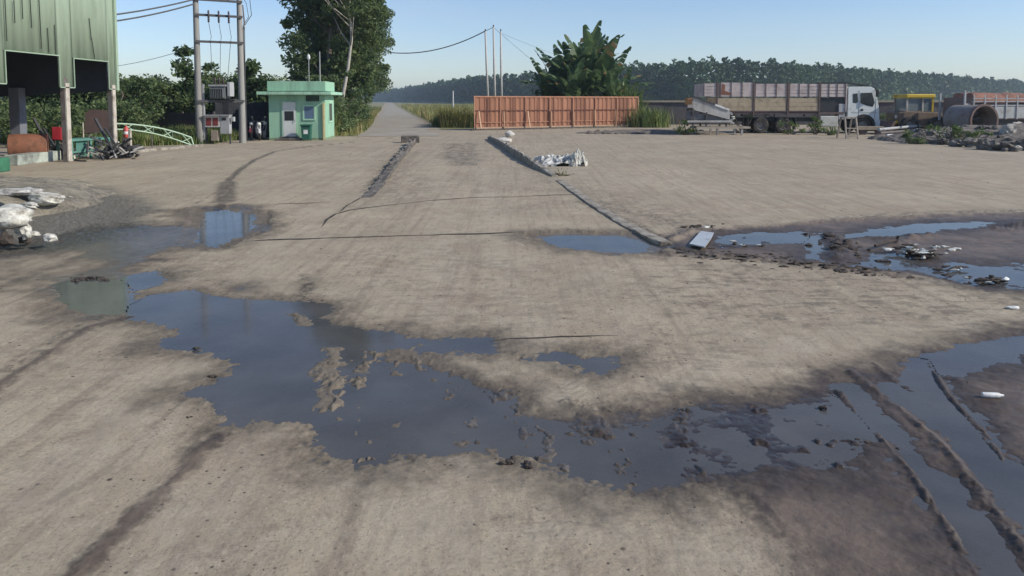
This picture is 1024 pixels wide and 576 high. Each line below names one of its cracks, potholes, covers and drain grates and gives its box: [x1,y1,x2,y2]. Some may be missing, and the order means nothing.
pothole [516,229,667,257]
pothole [176,205,274,250]
crack [243,194,574,242]
pothole [666,212,1024,293]
